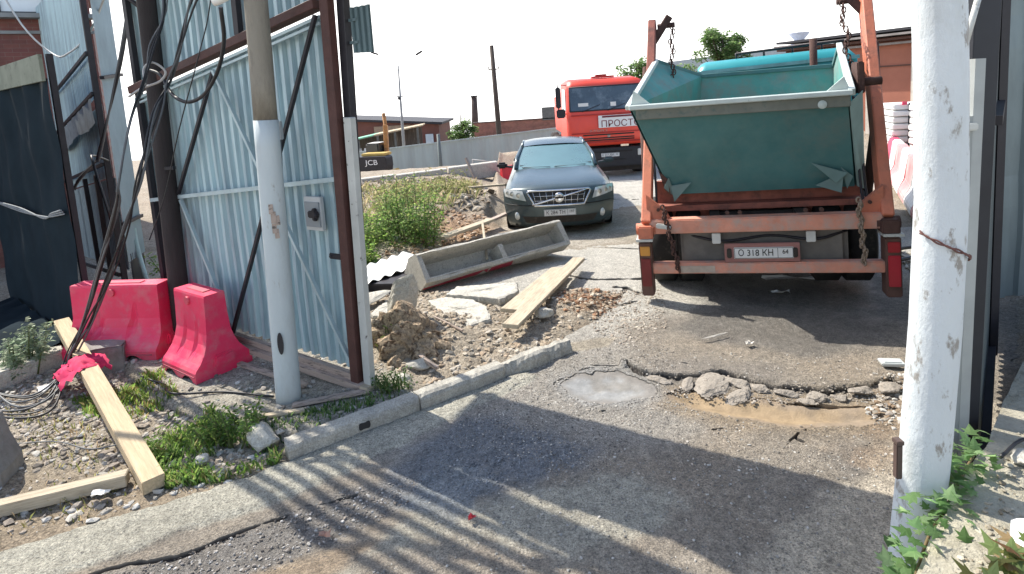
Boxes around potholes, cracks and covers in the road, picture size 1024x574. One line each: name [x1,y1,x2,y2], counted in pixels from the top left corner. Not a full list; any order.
crack [88,494,358,574]
pothole [666,388,898,429]
